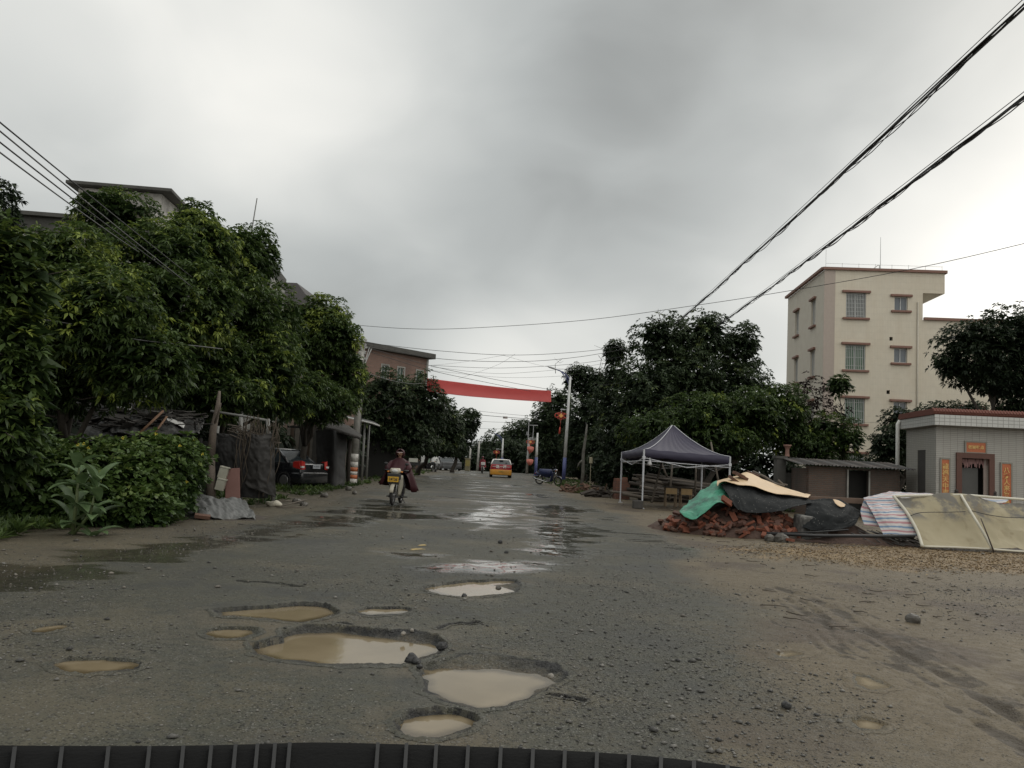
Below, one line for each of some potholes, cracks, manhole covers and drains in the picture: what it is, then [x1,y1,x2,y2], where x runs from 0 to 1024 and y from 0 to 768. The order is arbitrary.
pothole [39,656,150,677]
pothole [196,625,267,640]
pothole [242,622,453,669]
pothole [417,578,525,598]
pothole [345,606,418,618]
pothole [19,622,83,635]
pothole [204,601,346,624]
pothole [408,652,578,713]
pothole [385,705,490,743]
